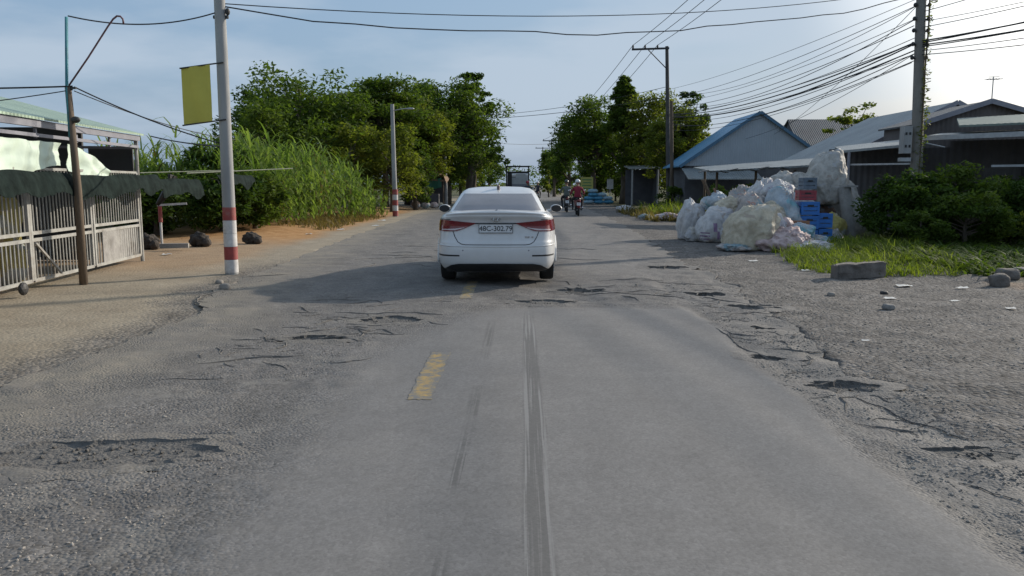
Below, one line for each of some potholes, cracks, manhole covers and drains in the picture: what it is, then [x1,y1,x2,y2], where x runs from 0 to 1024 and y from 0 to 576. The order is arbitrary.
pothole [0,432,258,483]
crack [169,296,451,380]
pothole [541,286,626,295]
pothole [499,297,591,307]
pothole [894,439,1024,471]
crack [536,278,1024,504]
pothole [779,375,907,399]
pothole [342,313,442,327]
